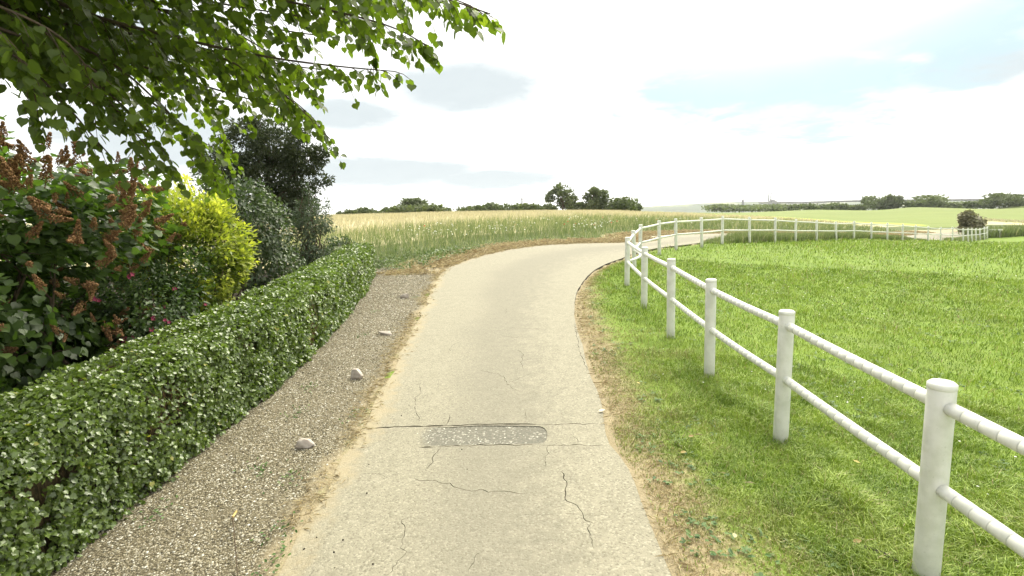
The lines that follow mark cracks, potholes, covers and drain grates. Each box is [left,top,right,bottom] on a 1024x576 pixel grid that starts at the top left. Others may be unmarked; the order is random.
crack [562,472,596,559]
